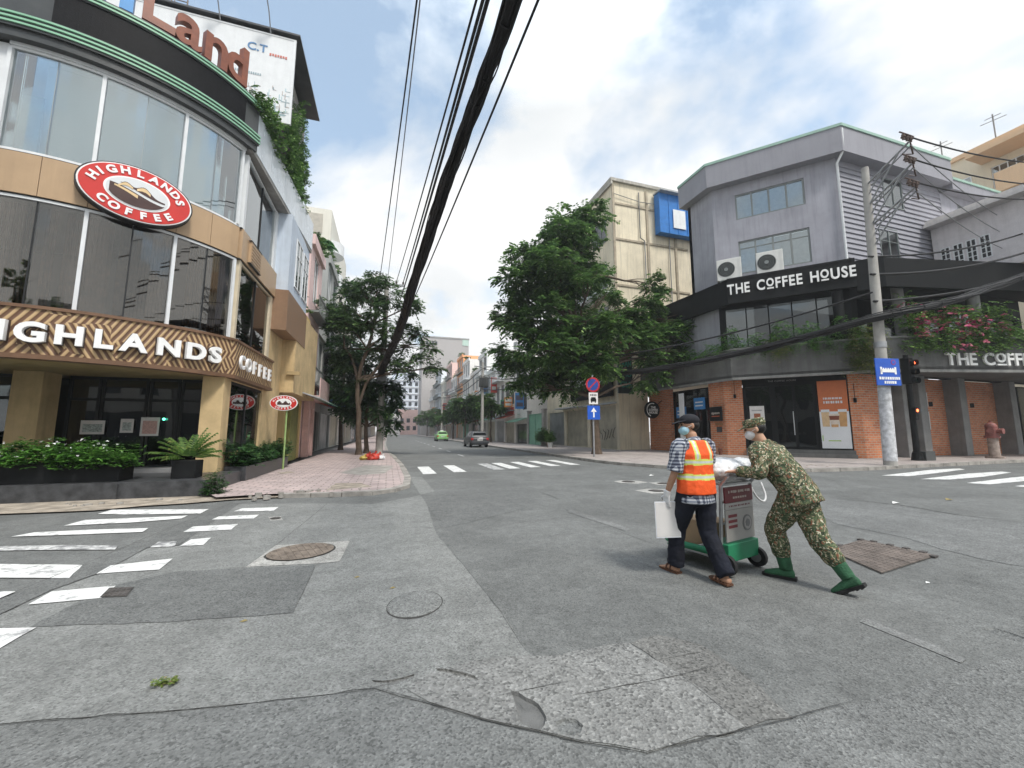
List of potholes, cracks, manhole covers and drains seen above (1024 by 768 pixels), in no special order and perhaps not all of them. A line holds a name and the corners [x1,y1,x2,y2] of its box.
manhole cover [100,587,134,597]
manhole cover [246,541,349,567]
manhole cover [386,591,443,619]
pothole [511,691,546,731]
manhole cover [836,538,939,574]
